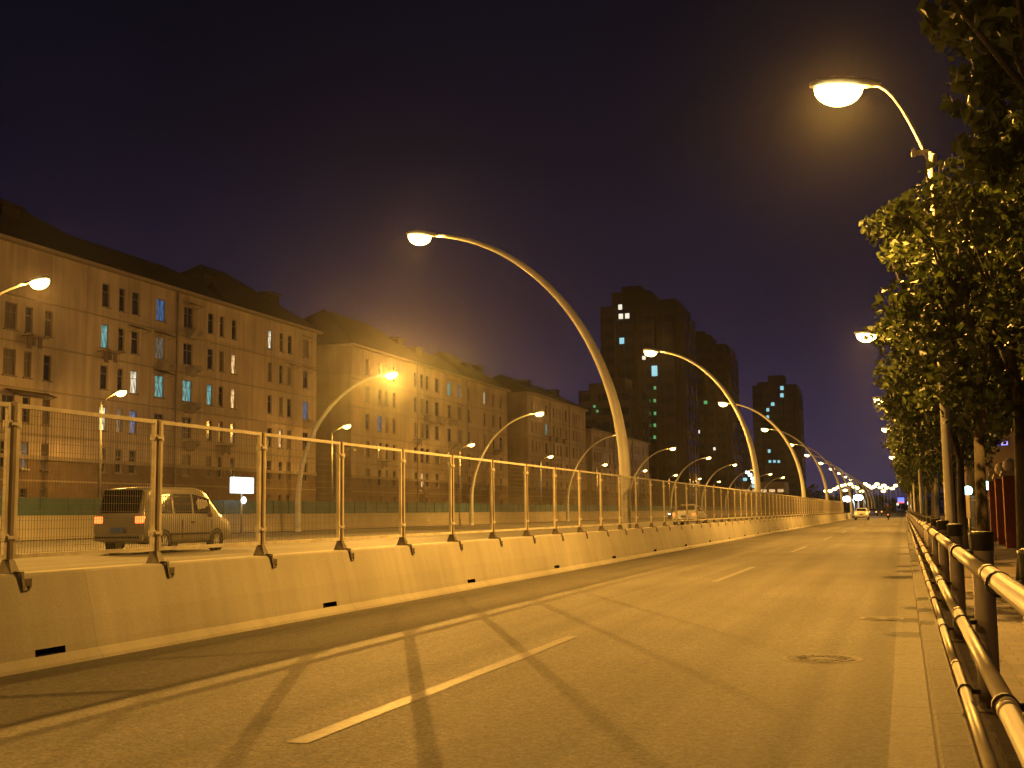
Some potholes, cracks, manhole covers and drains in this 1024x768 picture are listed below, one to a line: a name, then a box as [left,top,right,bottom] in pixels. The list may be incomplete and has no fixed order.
manhole cover [781,654,864,664]
